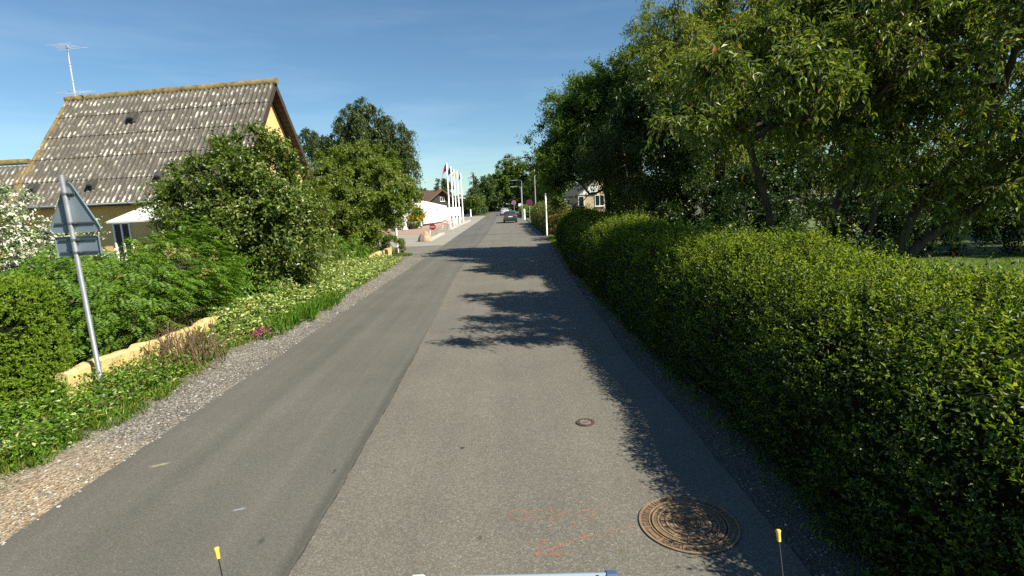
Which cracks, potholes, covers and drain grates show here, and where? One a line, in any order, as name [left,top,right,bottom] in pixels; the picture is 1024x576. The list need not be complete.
manhole cover [639,496,741,555]
manhole cover [576,418,595,426]
